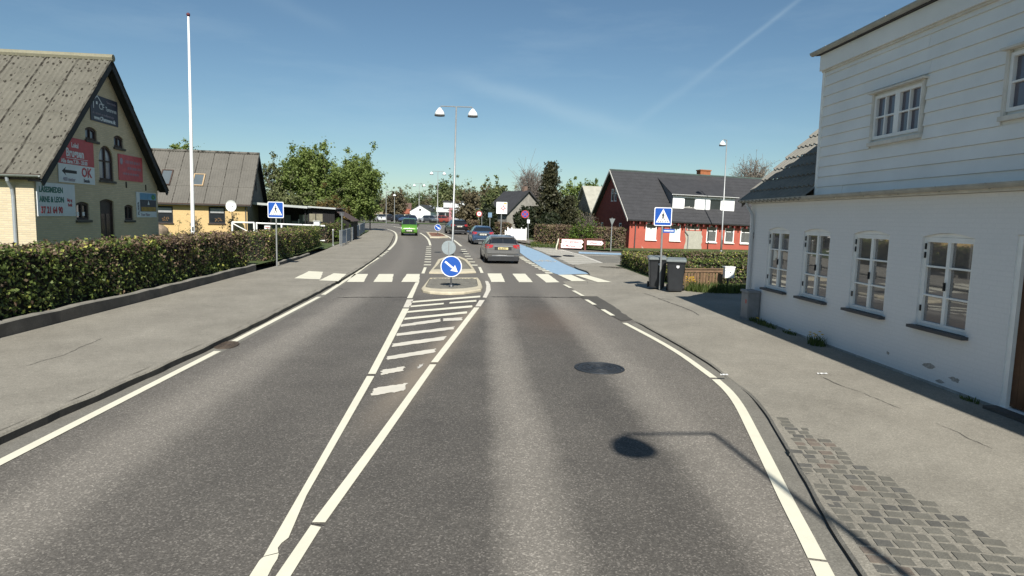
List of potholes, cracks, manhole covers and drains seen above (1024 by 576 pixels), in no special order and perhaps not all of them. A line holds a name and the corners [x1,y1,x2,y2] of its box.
manhole cover [214,341,239,349]
manhole cover [574,362,625,374]
